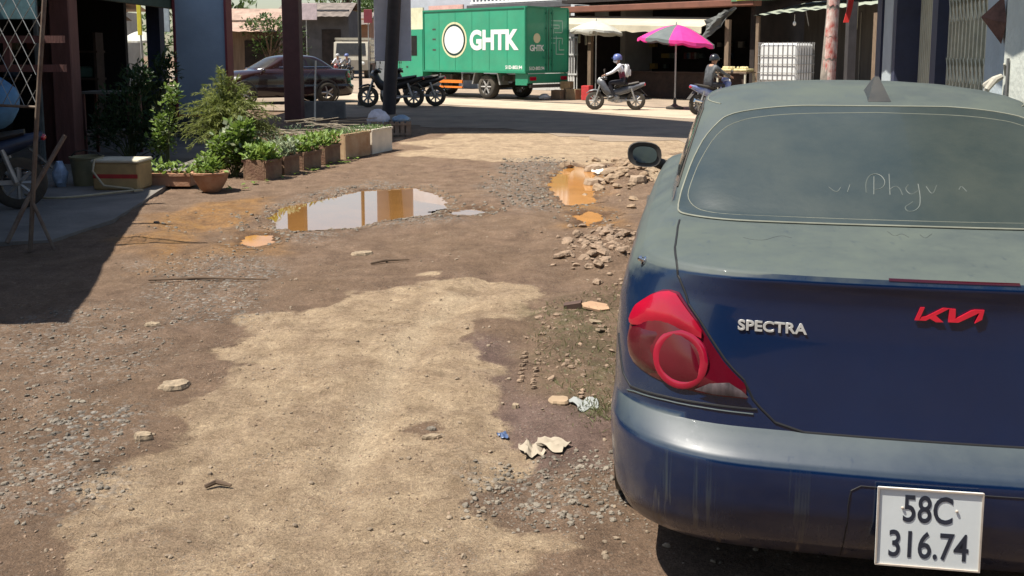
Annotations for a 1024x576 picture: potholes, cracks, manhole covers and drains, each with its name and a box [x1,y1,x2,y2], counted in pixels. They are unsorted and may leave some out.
pothole [534,160,610,207]
pothole [255,184,466,233]
